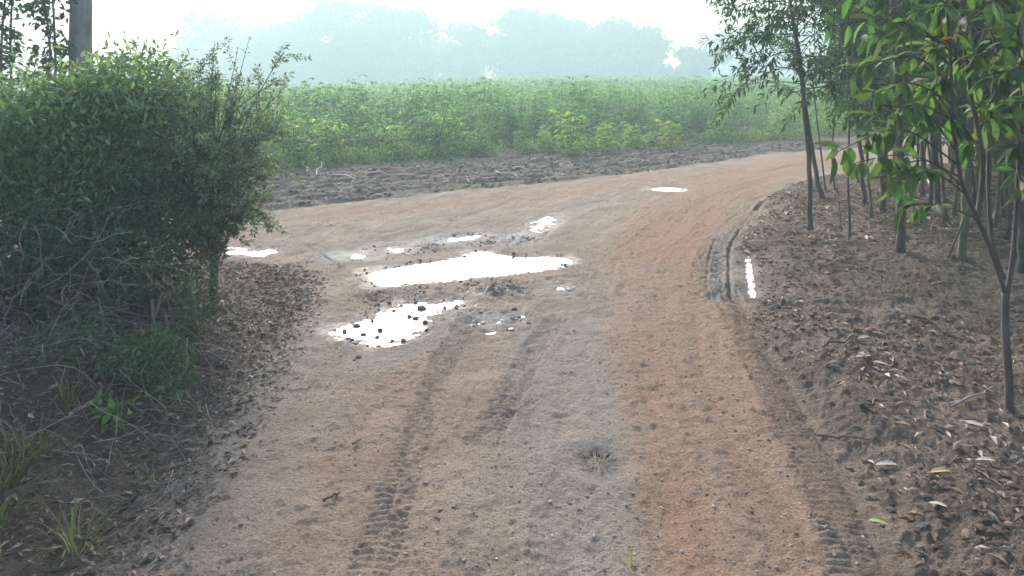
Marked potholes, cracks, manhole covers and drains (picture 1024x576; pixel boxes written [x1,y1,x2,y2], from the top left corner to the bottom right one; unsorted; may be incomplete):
pothole [324,296,471,347]
pothole [522,211,571,233]
pothole [218,241,286,258]
pothole [430,231,494,244]
pothole [358,247,577,287]
pothole [335,247,394,261]
pothole [738,251,764,298]
